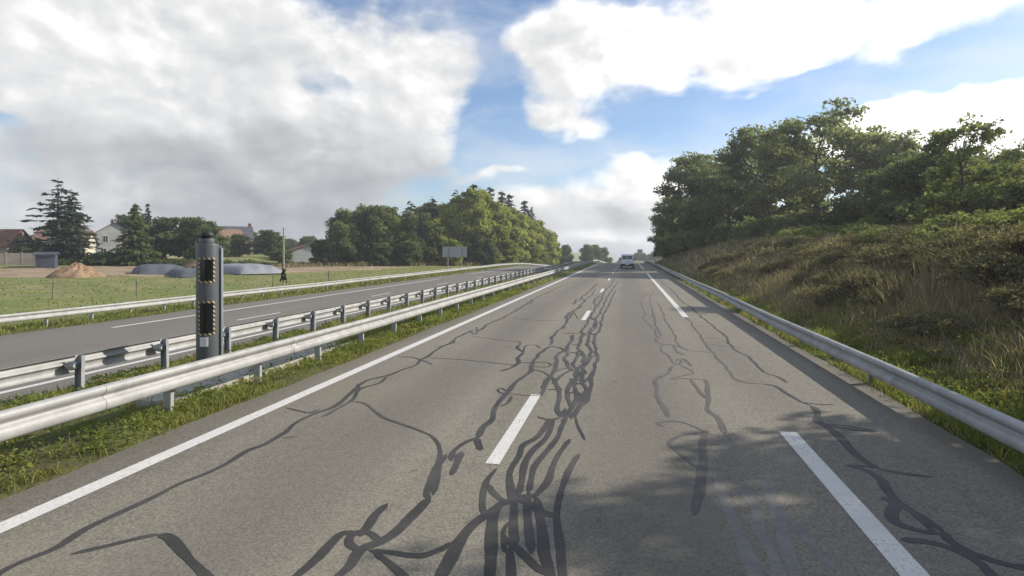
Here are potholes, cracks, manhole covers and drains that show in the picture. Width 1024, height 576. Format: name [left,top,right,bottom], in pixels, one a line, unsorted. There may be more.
crack [441,336,552,371]
